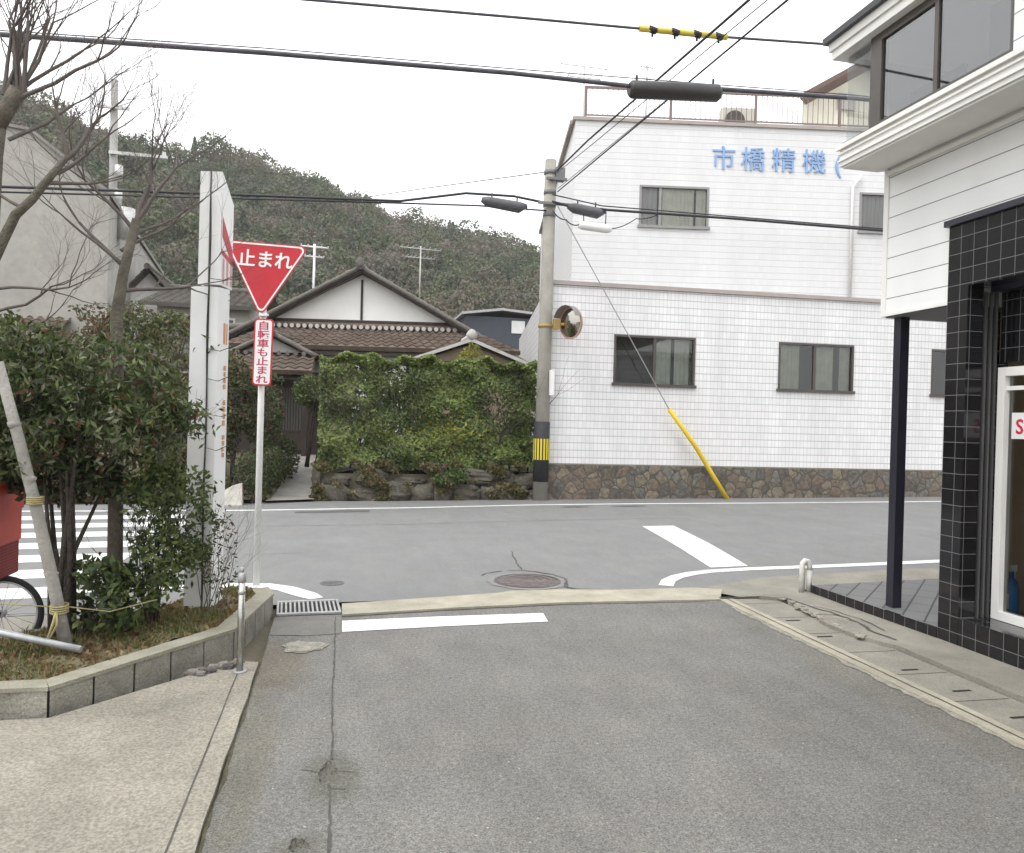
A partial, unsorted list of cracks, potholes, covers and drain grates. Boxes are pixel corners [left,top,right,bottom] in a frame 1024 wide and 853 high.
pothole [288,838,310,853]
drain grate [276,599,341,616]
pothole [318,761,339,784]
manhole cover [494,573,561,587]
crack [482,551,576,589]
crack [787,598,897,640]
crack [302,617,354,853]
